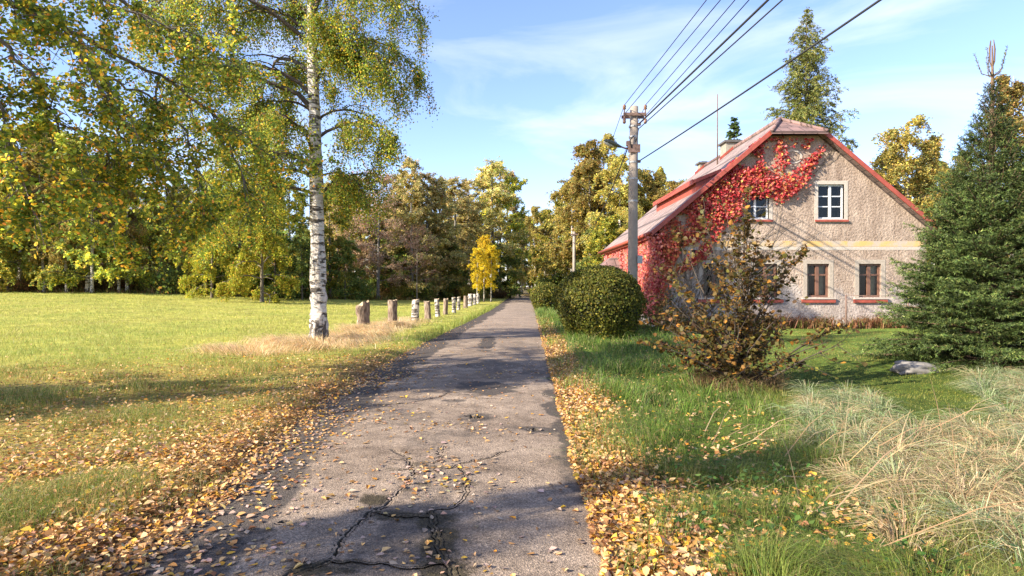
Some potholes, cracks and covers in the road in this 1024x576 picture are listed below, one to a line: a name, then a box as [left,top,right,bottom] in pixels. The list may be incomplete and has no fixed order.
crack [243,445,508,576]
